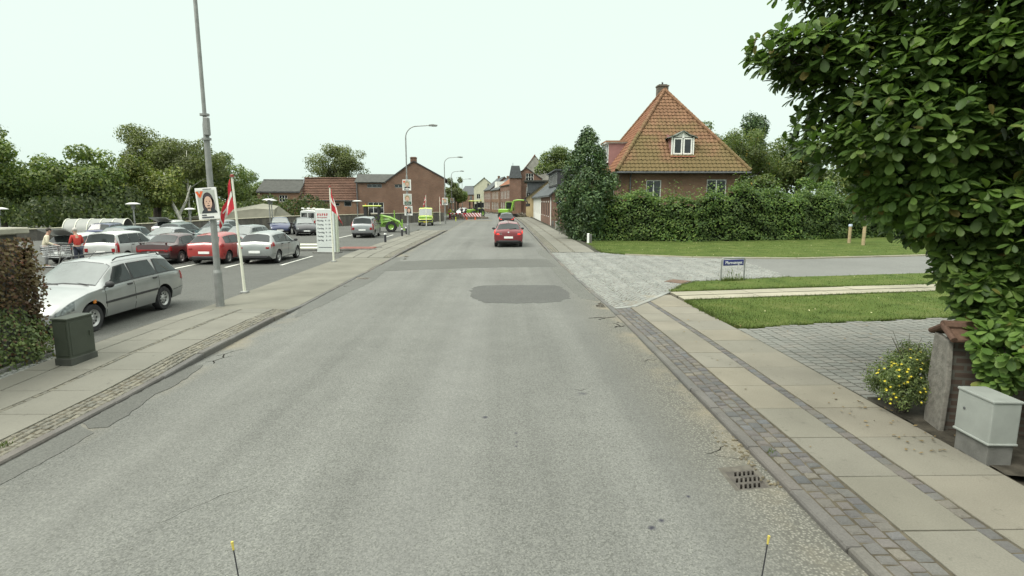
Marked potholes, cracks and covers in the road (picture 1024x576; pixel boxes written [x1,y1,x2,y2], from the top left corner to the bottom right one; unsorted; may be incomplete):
drain grate [718,465,774,491]
